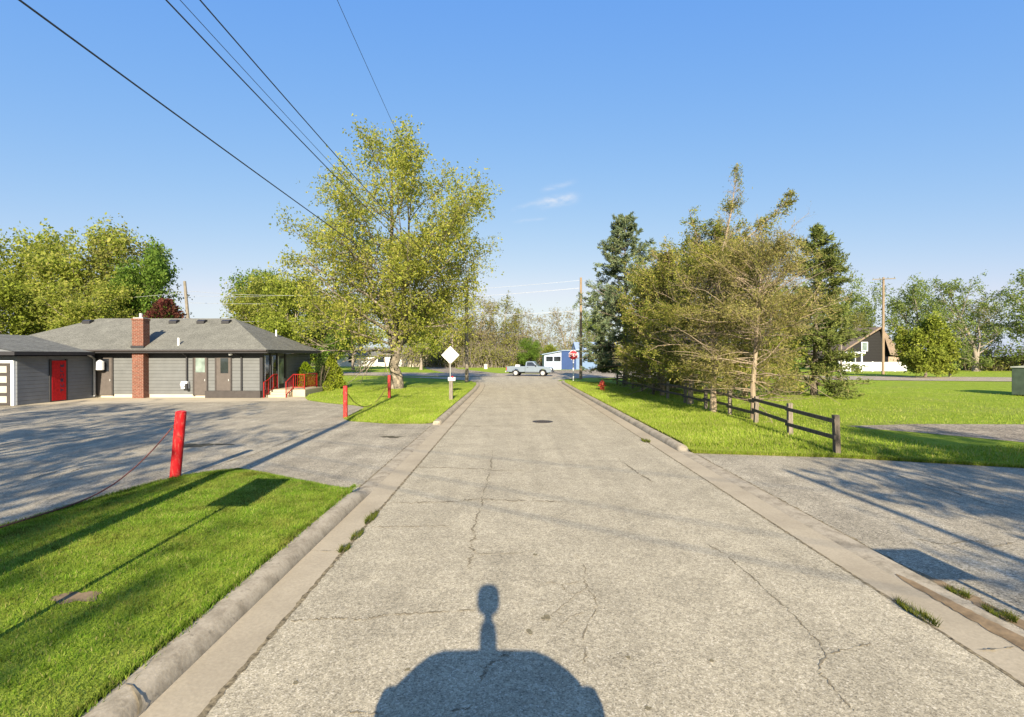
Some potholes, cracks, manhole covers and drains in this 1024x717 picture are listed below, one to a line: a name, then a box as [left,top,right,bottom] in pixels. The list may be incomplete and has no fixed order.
crack [399,447,562,568]
crack [541,555,598,663]
crack [708,544,871,710]
crack [291,609,470,622]
